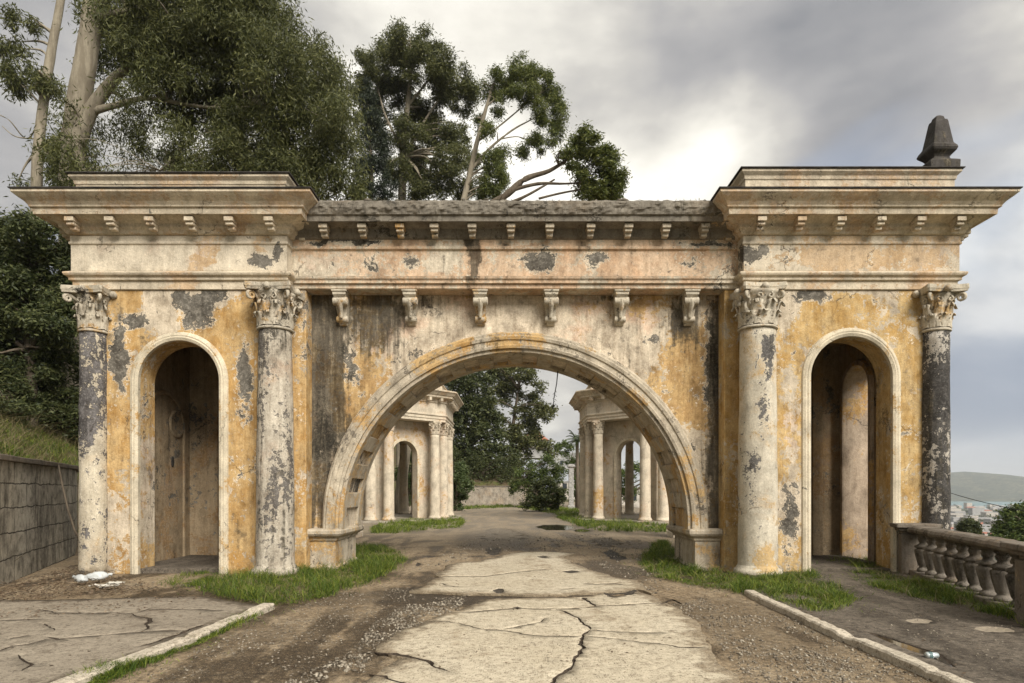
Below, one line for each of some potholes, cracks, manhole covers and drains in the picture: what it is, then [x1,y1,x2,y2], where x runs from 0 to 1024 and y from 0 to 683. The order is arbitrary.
crack [0,608,208,671]
crack [369,652,449,683]
pothole [604,550,627,561]
crack [438,583,699,683]
